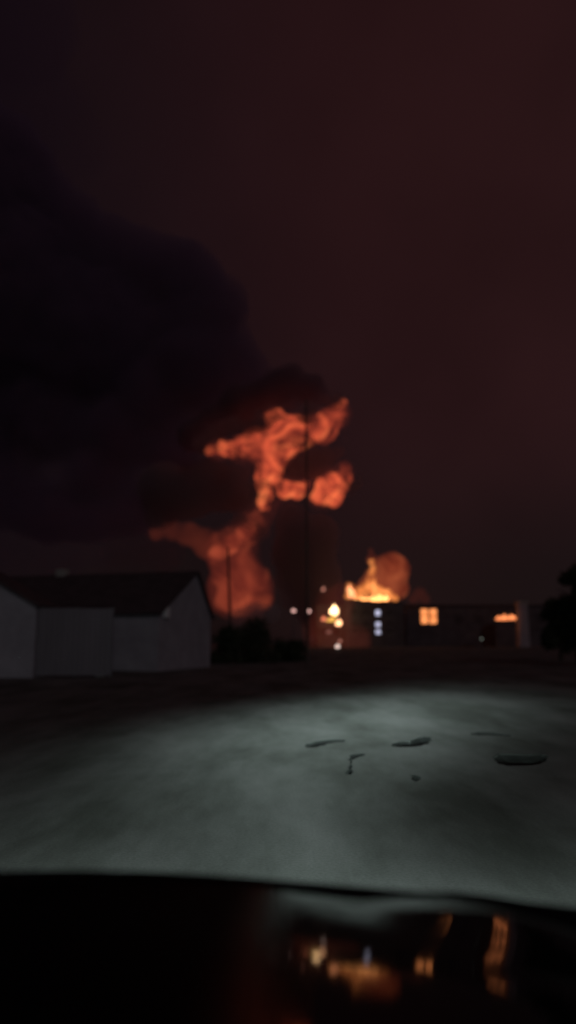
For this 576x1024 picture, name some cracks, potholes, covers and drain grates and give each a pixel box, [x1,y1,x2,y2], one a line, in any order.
pothole [391,737,432,747]
pothole [304,740,346,748]
pothole [493,754,549,766]
crack [345,753,365,774]
